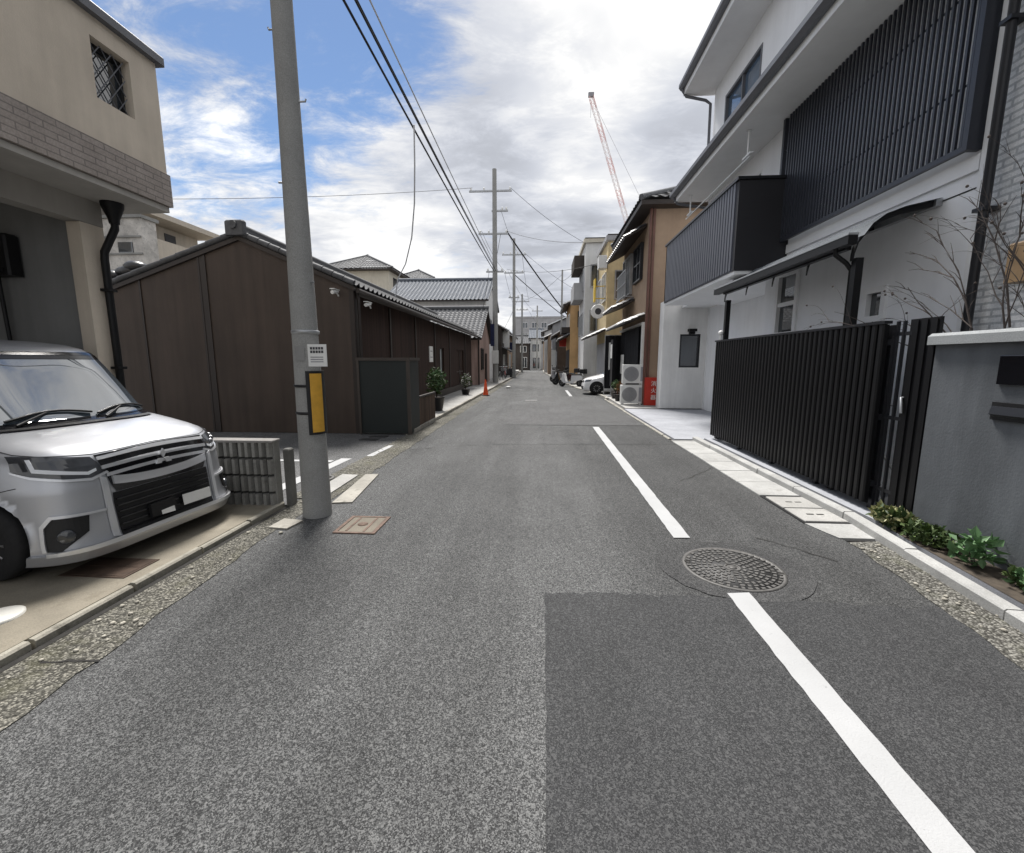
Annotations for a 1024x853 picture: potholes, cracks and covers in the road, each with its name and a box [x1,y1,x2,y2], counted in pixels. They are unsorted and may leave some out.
manhole cover [656,542,818,603]
